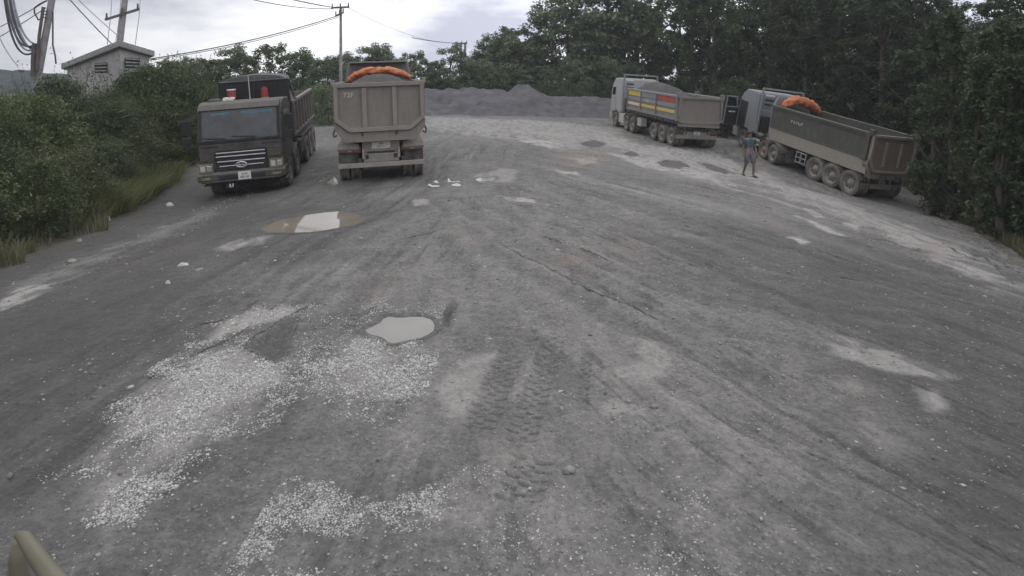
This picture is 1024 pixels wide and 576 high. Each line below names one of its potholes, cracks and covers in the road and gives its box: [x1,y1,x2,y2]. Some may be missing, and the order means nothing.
pothole [253,209,374,234]
pothole [359,311,441,345]
pothole [658,159,690,169]
